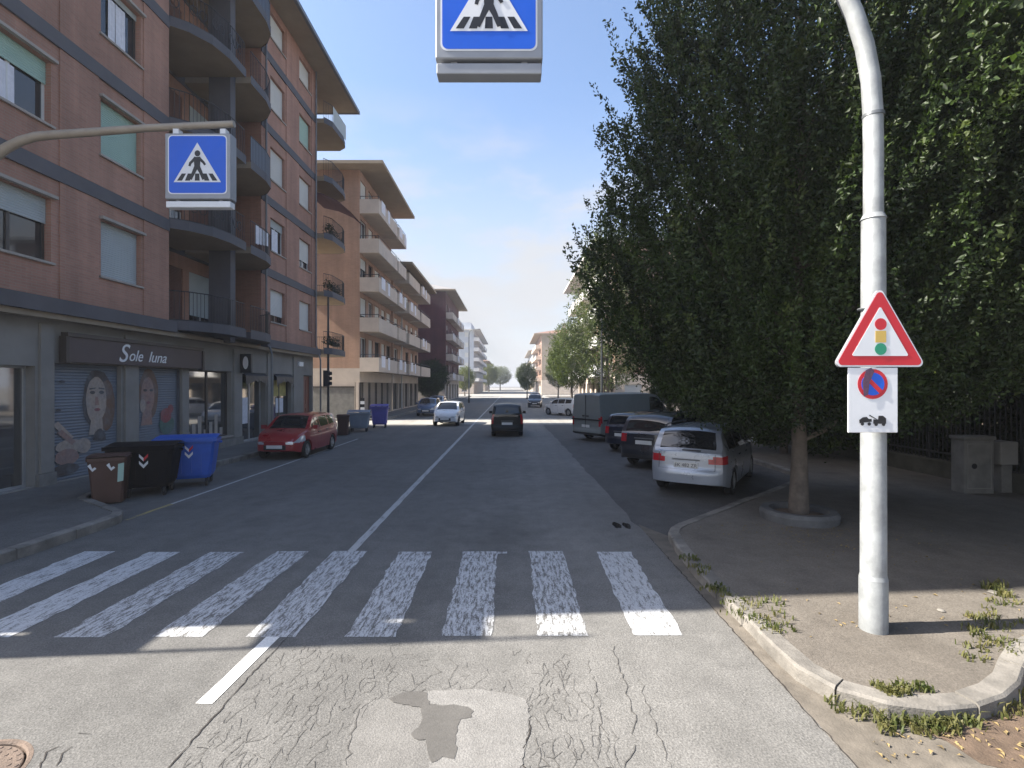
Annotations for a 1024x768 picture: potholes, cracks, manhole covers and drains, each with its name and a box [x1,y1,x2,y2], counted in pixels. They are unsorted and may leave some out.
crack [387,650,521,692]
crack [522,646,672,768]
manhole cover [0,739,34,768]
crack [39,733,91,768]
crack [182,643,400,768]
